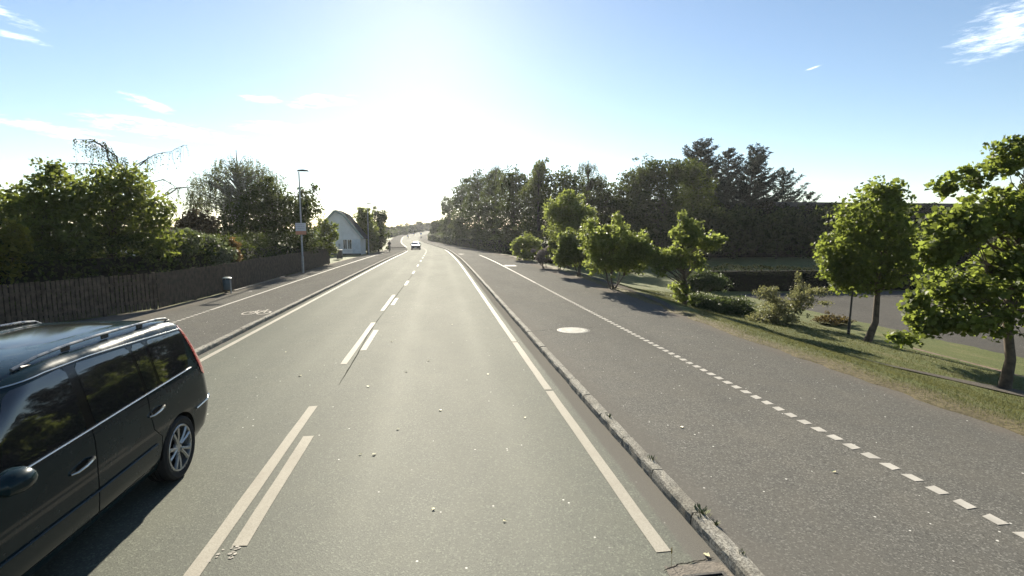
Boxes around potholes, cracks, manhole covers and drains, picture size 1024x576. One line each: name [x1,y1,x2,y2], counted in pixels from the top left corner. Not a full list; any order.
drain grate [664,561,733,576]
